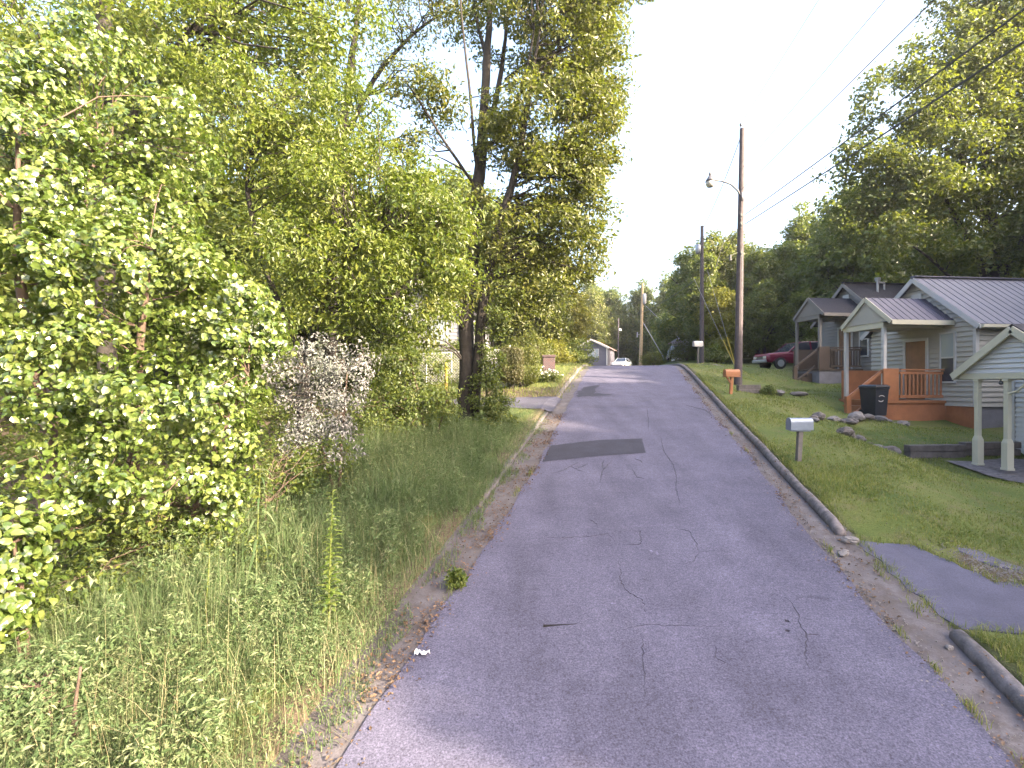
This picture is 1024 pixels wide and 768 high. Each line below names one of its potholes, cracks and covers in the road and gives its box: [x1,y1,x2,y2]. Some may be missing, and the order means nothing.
crack [615,531,715,699]
crack [791,602,817,671]
